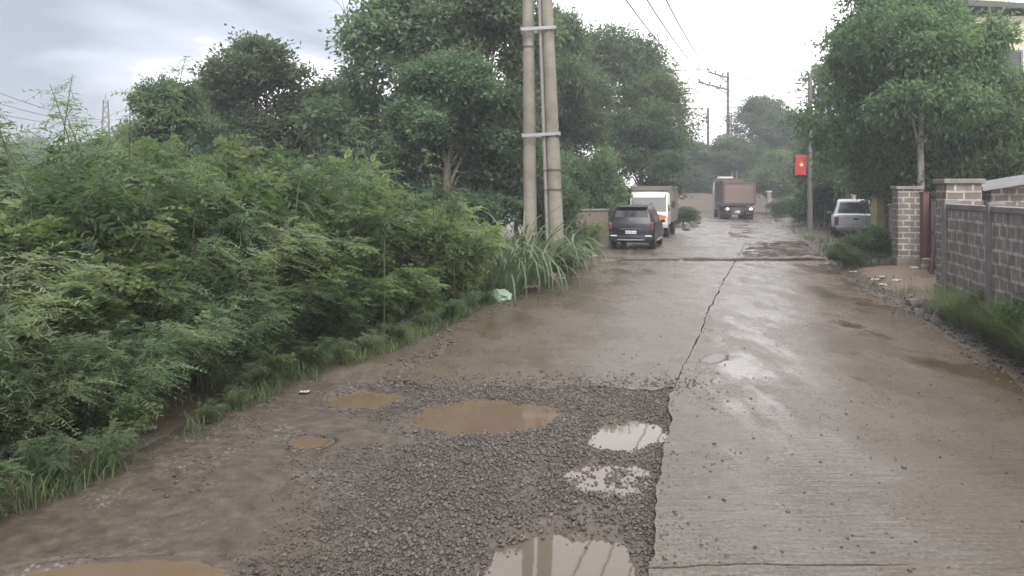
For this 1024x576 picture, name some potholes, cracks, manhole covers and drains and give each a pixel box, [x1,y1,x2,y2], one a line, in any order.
pothole [550,456,661,502]
pothole [452,515,651,576]
pothole [386,392,586,441]
pothole [283,434,335,454]
pothole [310,386,418,412]
crack [634,256,817,381]
pothole [574,414,669,457]
pothole [700,353,728,364]
